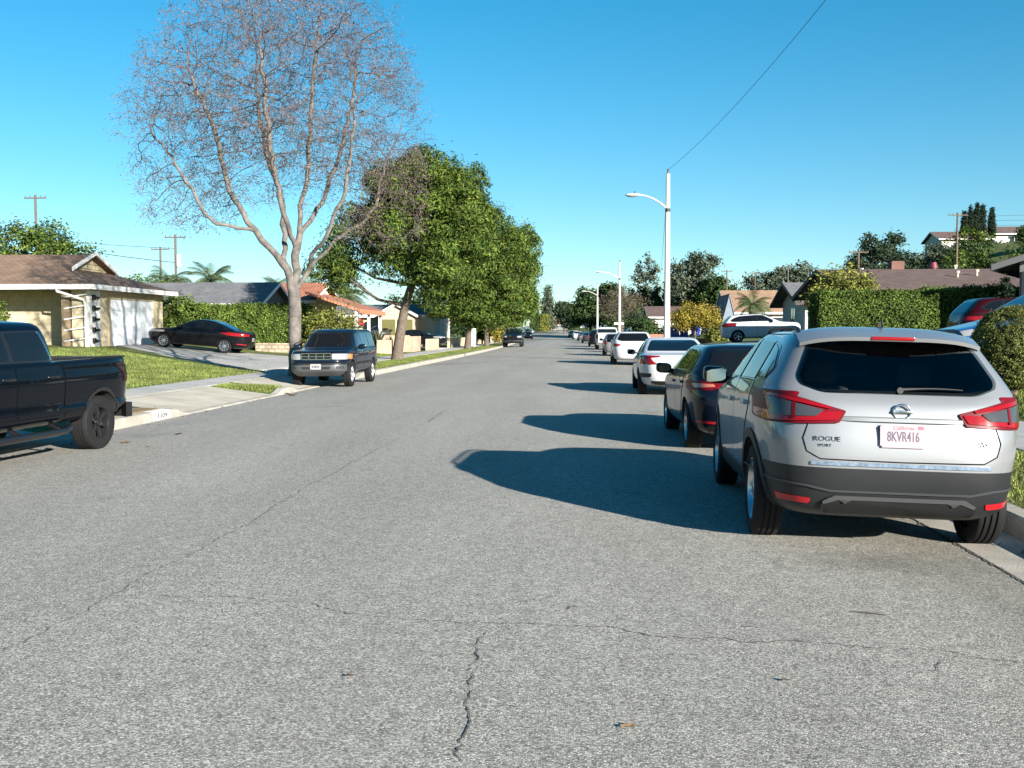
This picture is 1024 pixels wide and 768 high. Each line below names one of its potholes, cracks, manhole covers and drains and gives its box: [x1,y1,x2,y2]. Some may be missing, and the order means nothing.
crack [165,595,1018,761]
